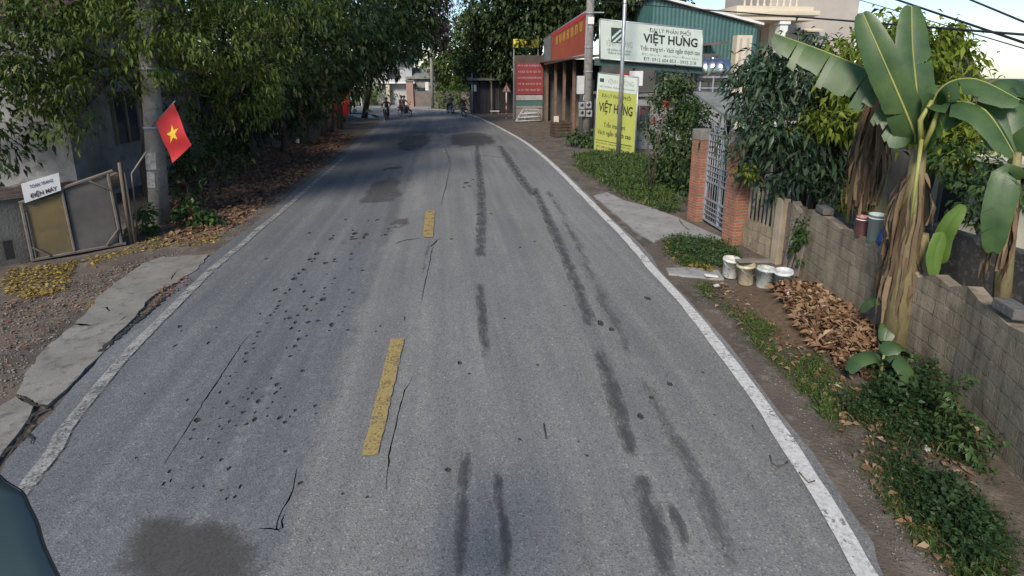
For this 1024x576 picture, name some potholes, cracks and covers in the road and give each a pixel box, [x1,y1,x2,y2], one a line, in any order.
crack [1,394,48,457]
